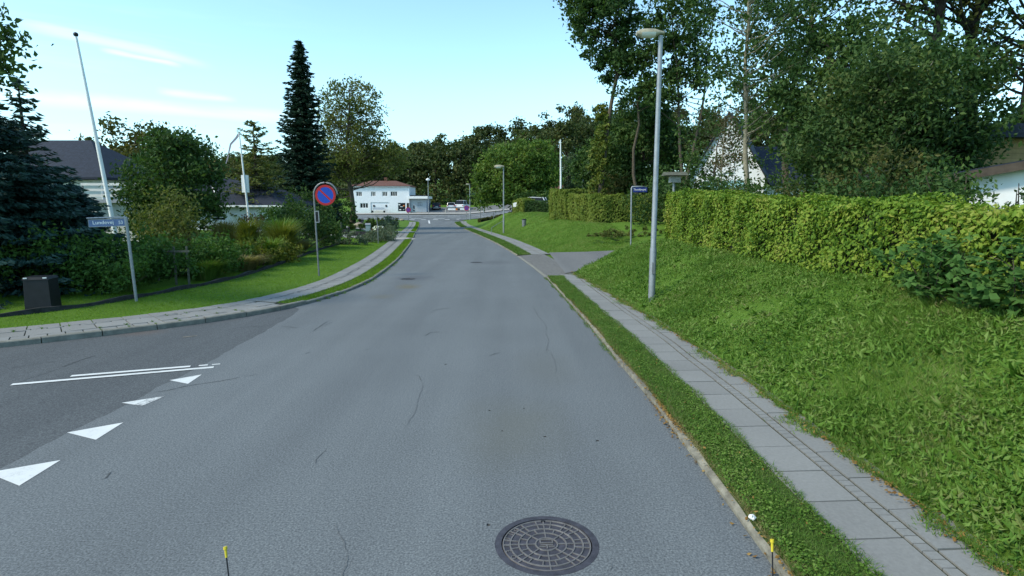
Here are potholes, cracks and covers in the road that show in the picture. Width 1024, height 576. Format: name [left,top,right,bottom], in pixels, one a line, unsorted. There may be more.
manhole cover [495,516,599,576]
